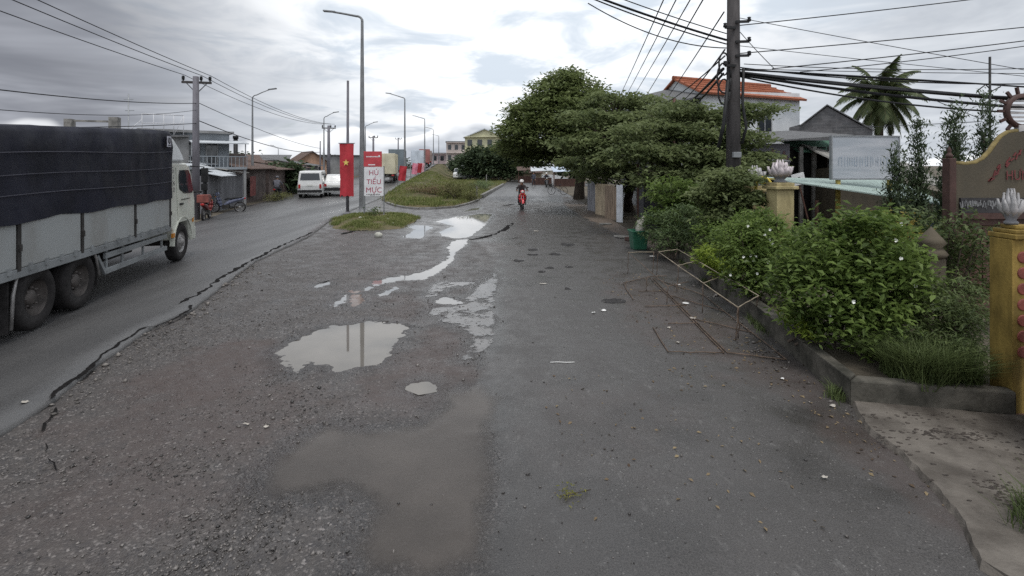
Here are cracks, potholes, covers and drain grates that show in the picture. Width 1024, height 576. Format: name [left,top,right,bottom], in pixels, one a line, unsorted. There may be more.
pothole [405,382,437,395]
pothole [429,273,499,360]
pothole [403,225,433,239]
pothole [348,290,365,306]
pothole [275,321,410,373]
pothole [435,214,492,238]
